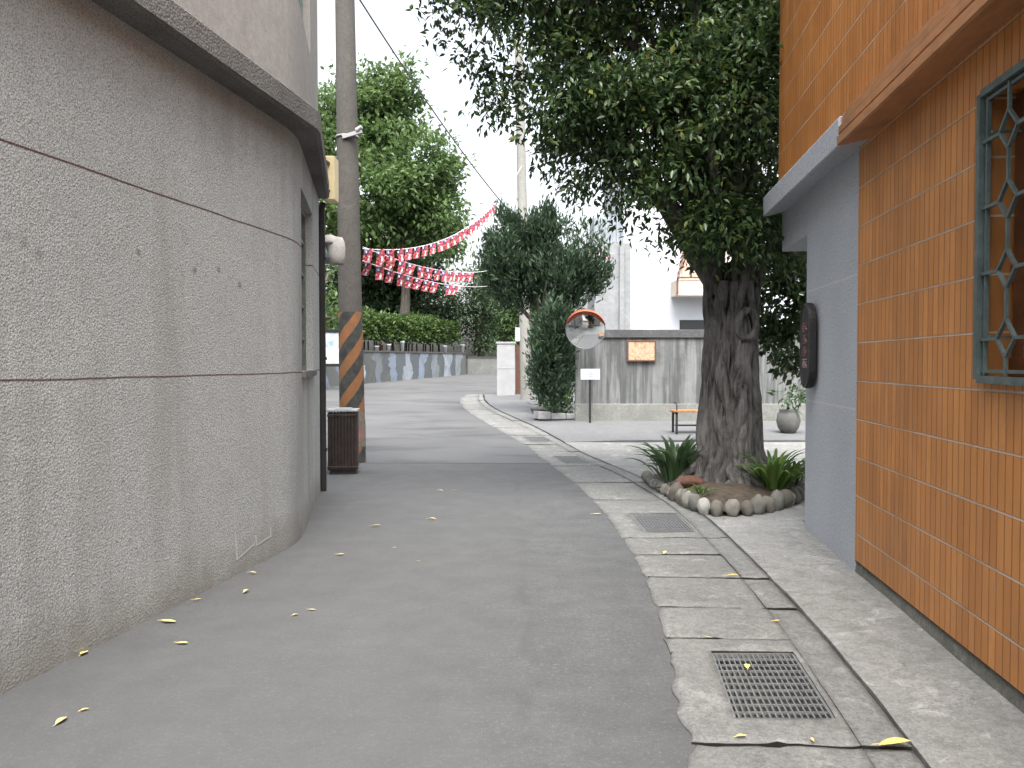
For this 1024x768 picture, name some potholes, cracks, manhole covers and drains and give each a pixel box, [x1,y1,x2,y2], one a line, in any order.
drain grate [630,514,695,532]
drain grate [712,653,834,718]
